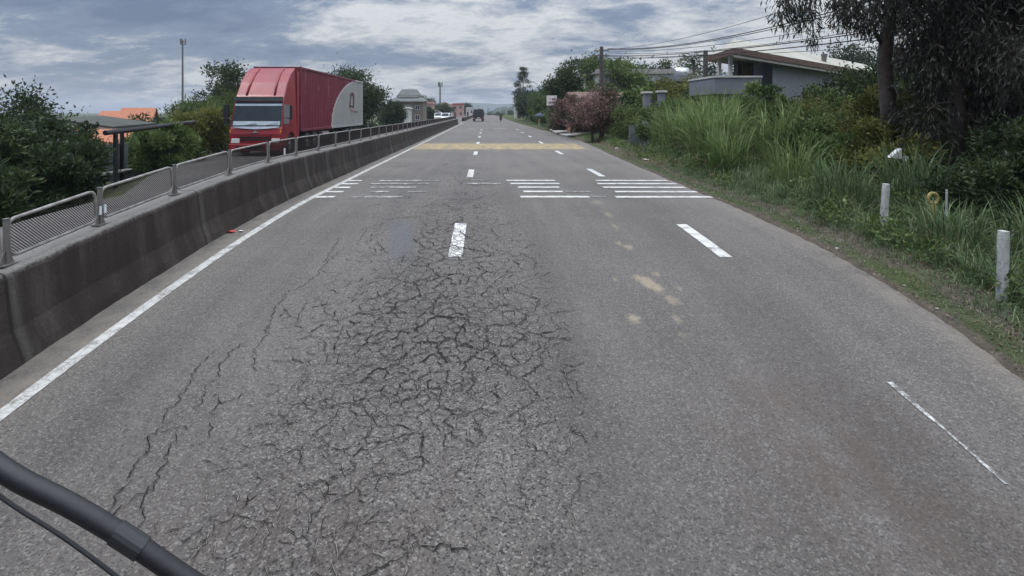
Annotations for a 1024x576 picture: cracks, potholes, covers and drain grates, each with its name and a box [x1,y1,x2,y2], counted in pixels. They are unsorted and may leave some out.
crack [108,228,372,528]
